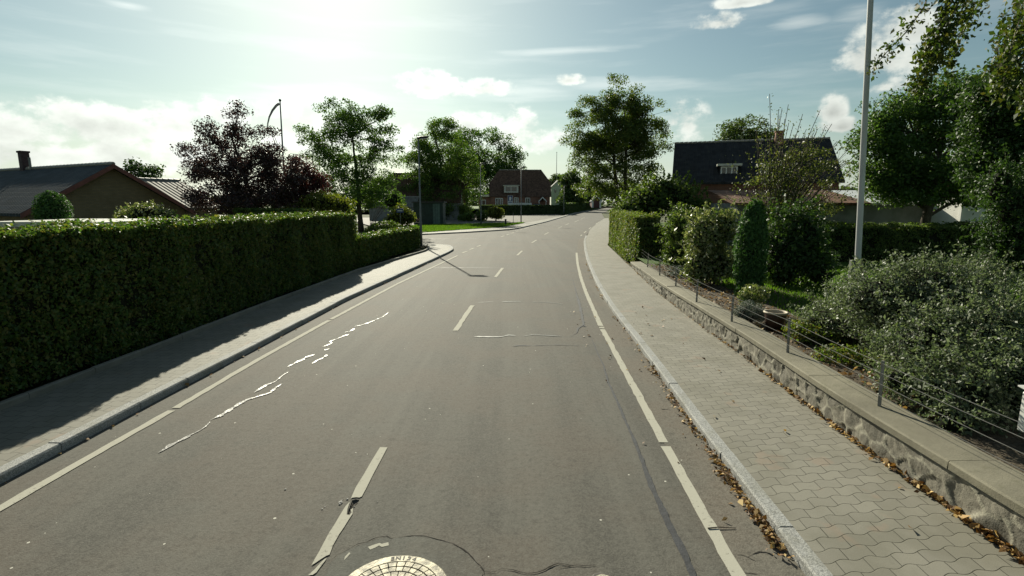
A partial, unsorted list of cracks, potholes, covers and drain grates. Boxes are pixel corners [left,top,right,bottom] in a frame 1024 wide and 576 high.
manhole cover [349,556,447,576]
crack [493,563,590,574]
